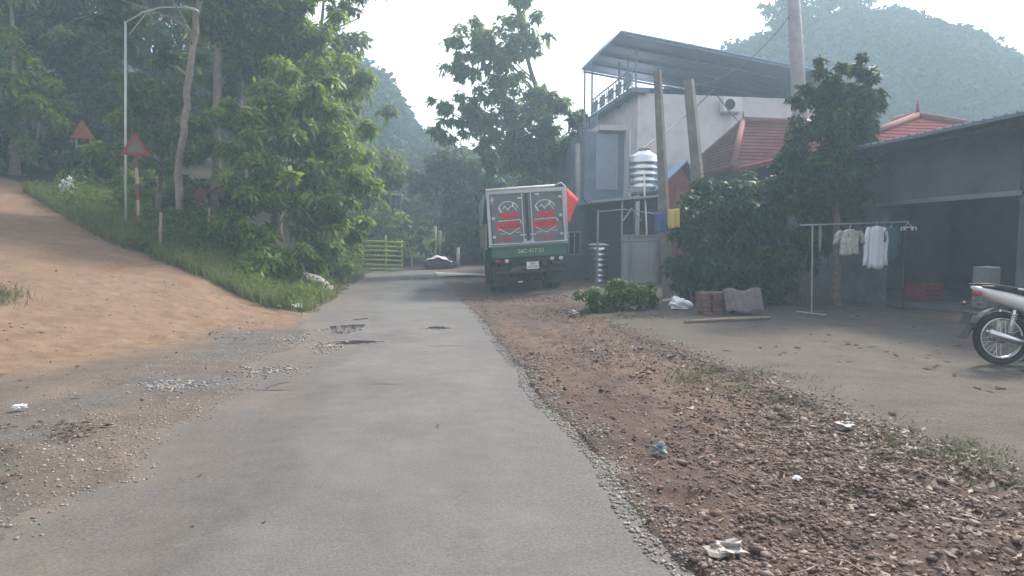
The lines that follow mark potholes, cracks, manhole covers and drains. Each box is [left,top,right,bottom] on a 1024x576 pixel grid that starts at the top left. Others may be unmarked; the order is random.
pothole [314,324,369,335]
